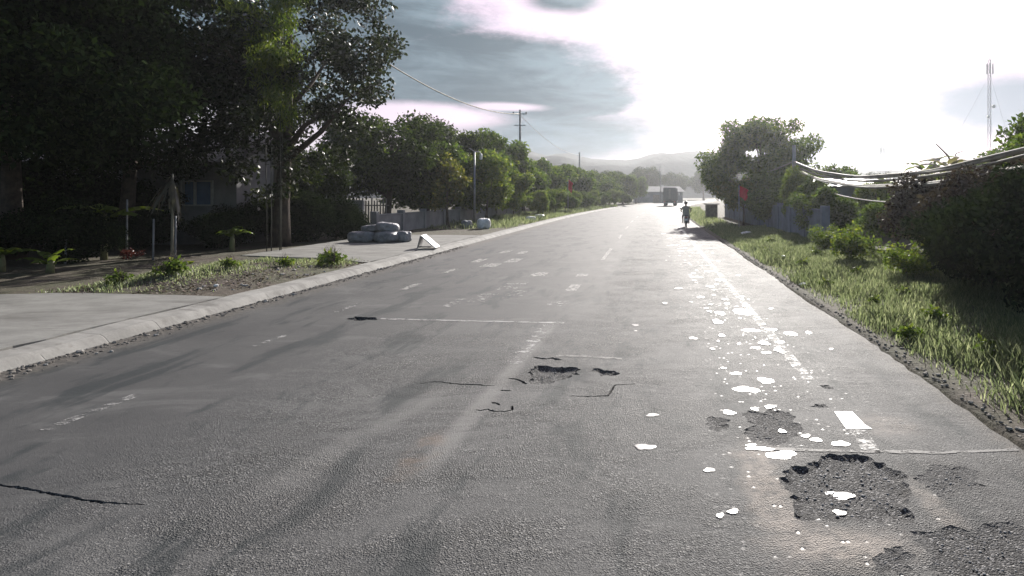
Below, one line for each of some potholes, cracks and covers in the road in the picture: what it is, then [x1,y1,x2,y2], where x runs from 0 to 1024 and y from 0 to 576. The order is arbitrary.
pothole [872,546,917,574]
pothole [591,368,620,376]
crack [426,378,527,412]
pothole [528,365,580,384]
crack [0,484,145,505]
pothole [779,453,915,524]
pothole [743,409,804,445]
pothole [910,522,1024,576]
pothole [705,416,731,432]
